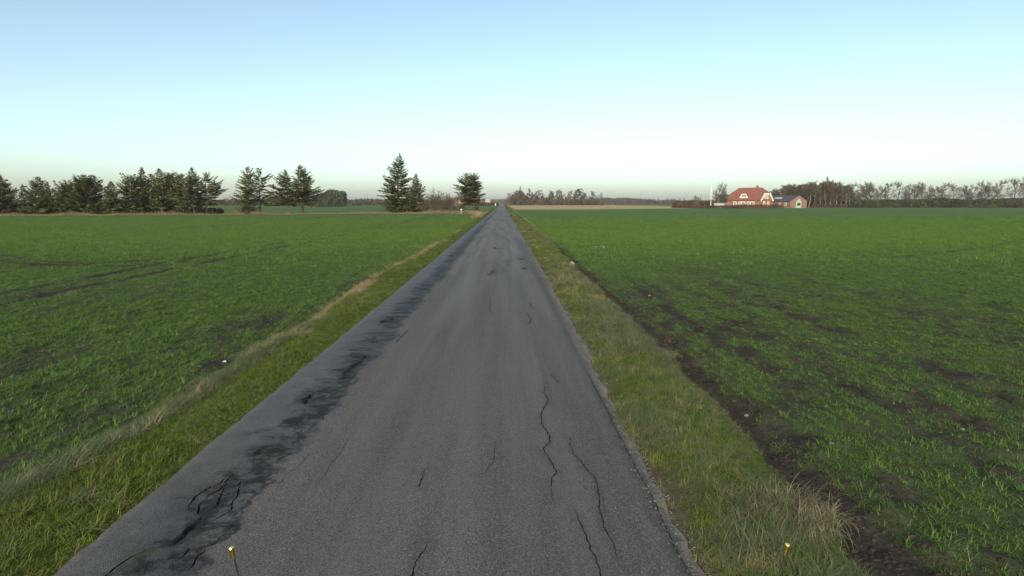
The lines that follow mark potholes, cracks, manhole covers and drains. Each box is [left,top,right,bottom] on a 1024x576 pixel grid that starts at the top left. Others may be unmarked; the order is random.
crack [586,369,690,576]
crack [105,474,241,576]
crack [540,375,620,576]
